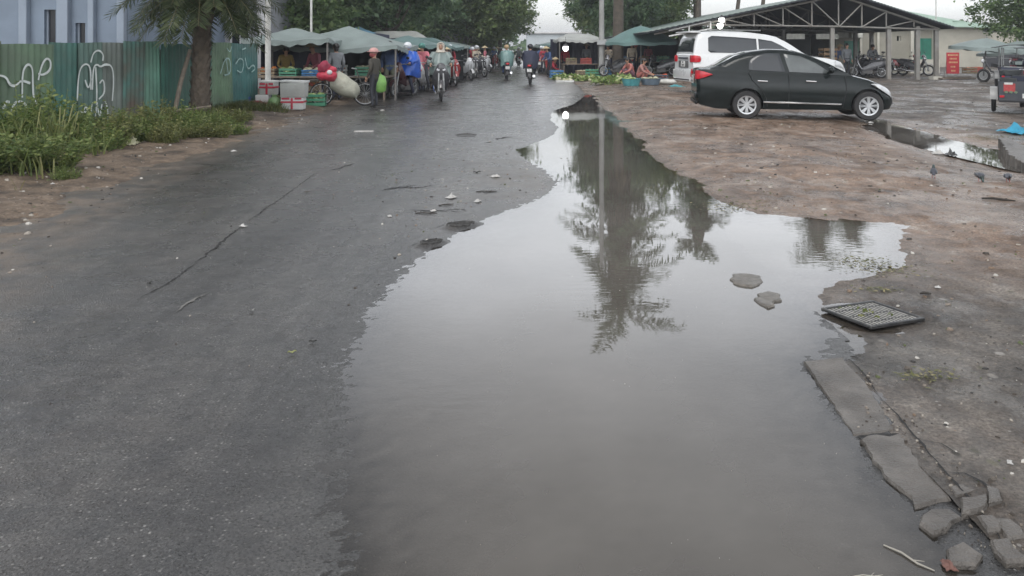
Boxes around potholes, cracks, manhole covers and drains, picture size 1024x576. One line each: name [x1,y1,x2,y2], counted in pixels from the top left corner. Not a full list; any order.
crack [138,164,352,311]
